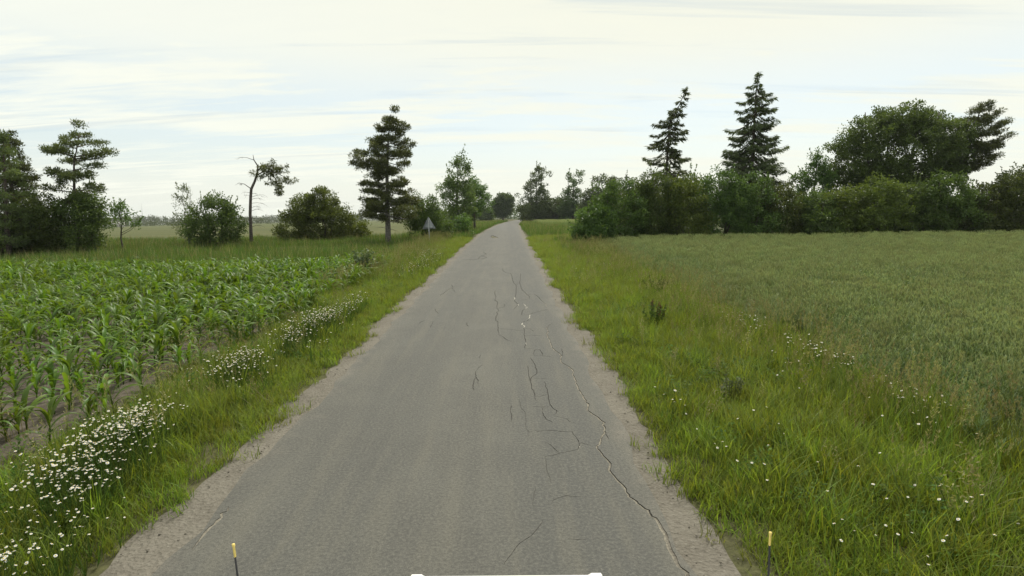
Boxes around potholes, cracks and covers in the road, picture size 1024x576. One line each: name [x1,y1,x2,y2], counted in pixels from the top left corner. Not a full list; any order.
crack [494,272,690,576]
